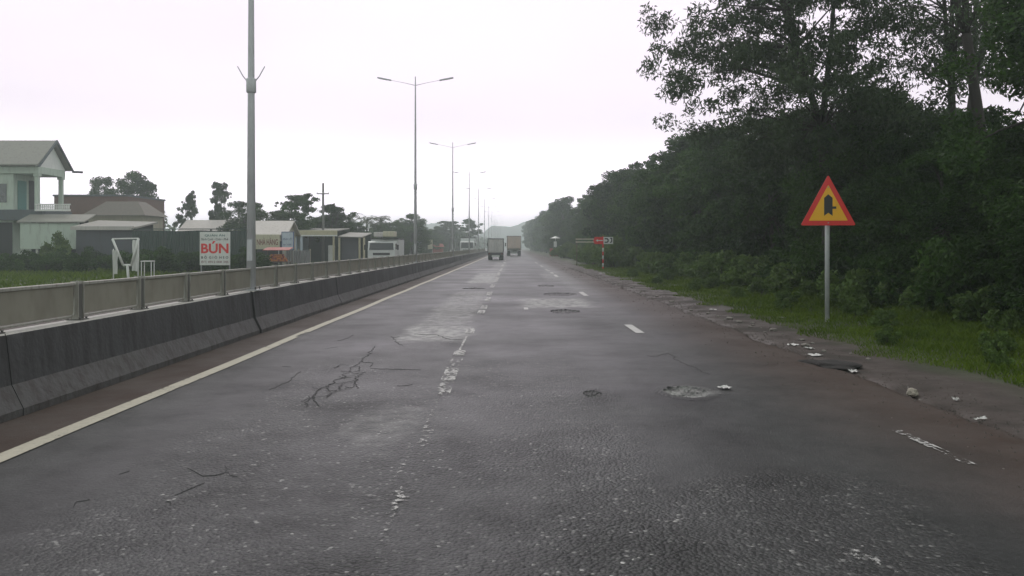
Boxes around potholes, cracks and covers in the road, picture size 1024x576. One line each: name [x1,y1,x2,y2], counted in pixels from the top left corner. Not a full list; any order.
crack [270,335,412,406]
crack [167,466,237,504]
pothole [578,389,607,400]
pothole [654,384,720,401]
